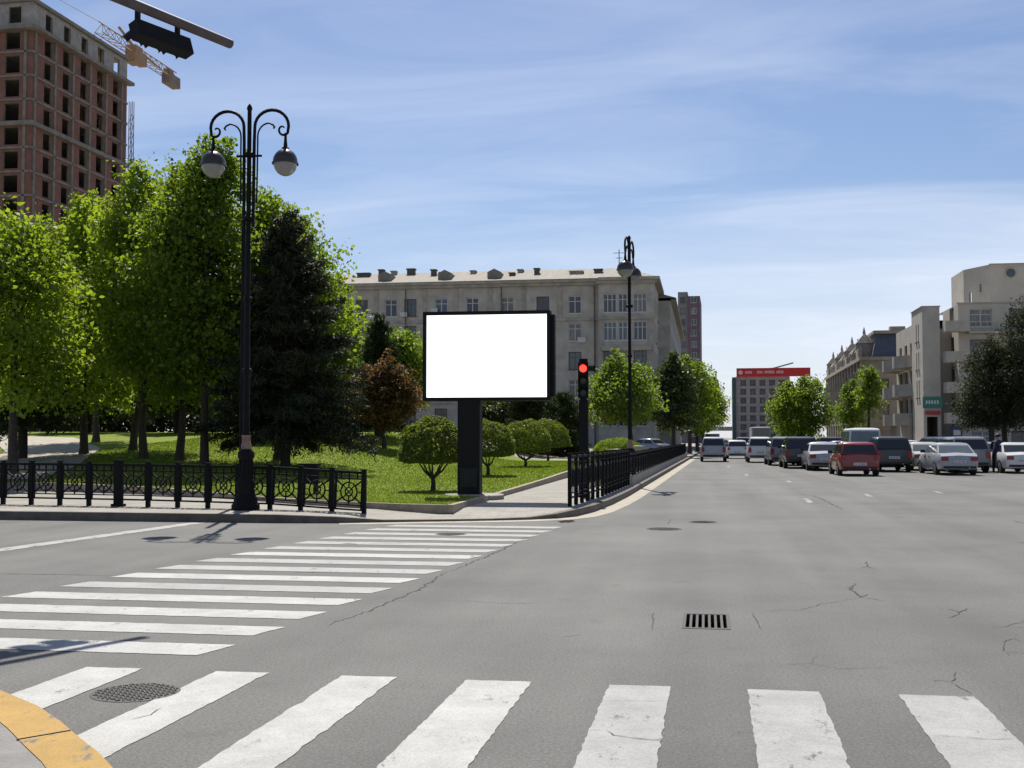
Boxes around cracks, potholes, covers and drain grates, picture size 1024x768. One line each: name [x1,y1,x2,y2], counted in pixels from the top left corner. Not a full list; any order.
crack [334,532,541,622]
manhole cover [89,683,181,702]
drain grate [682,613,731,630]
